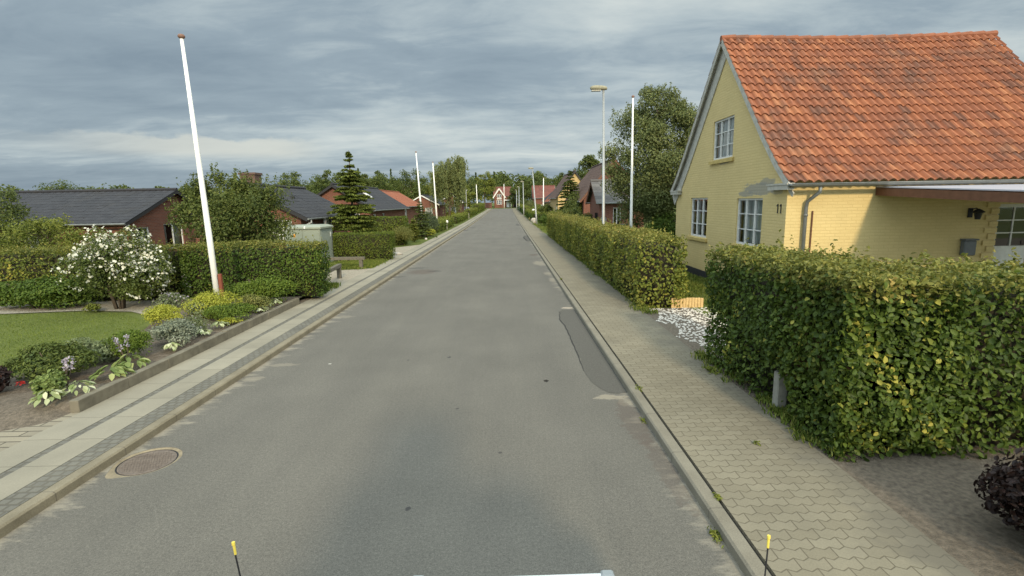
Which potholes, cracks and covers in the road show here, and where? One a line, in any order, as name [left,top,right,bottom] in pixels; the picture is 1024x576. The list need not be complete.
manhole cover [105,447,182,479]
